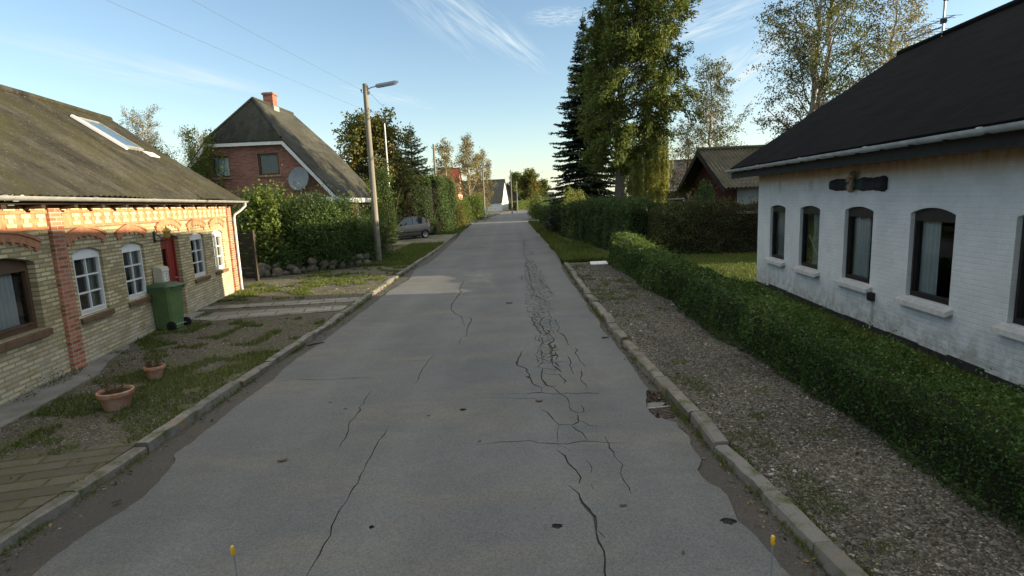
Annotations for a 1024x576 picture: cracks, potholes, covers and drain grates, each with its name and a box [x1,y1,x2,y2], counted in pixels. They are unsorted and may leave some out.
crack [307,389,387,575]
crack [477,237,631,576]
crack [451,281,472,343]
pothole [646,390,680,416]
